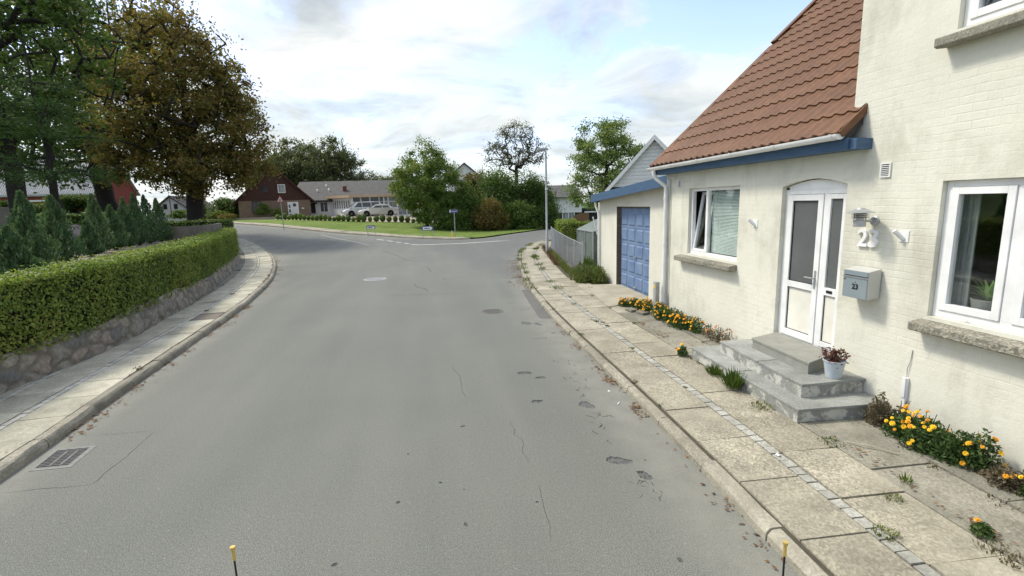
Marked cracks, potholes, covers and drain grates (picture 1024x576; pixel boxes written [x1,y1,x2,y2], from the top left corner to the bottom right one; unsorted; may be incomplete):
pothole [631,470,661,500]
drain grate [28,445,97,472]
pothole [606,456,633,464]
